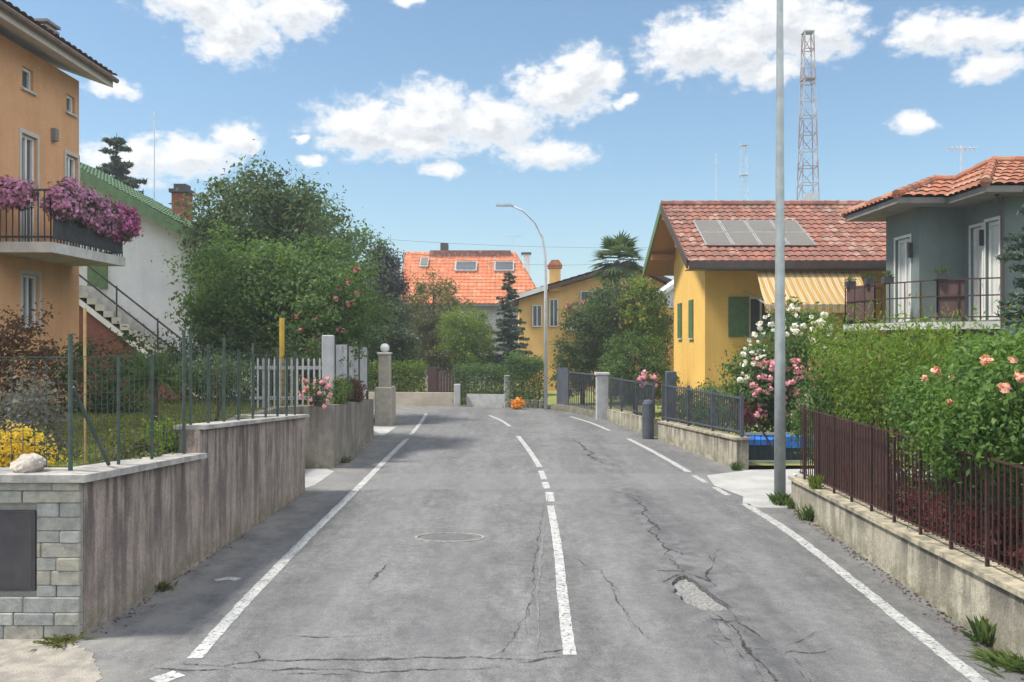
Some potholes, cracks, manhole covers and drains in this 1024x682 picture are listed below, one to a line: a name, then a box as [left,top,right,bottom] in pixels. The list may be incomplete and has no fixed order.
pothole [672,575,731,611]
crack [575,558,646,635]
crack [695,612,829,682]
crack [153,619,562,675]
crack [615,491,786,585]
crack [525,505,544,630]
manhole cover [415,532,485,543]
